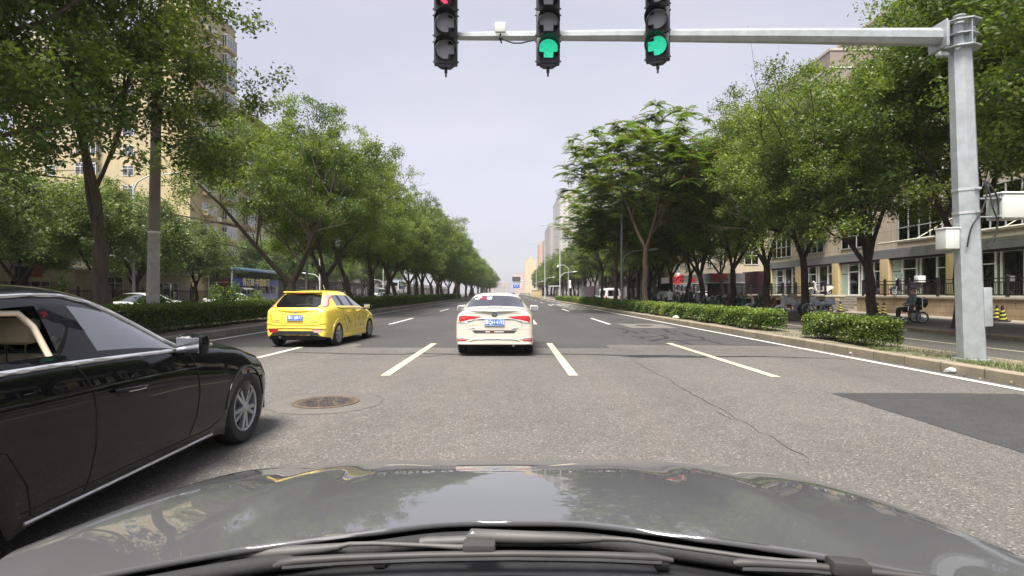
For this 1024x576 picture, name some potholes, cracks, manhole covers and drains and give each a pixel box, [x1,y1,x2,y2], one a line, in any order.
manhole cover [262,392,384,414]
crack [629,357,808,458]
